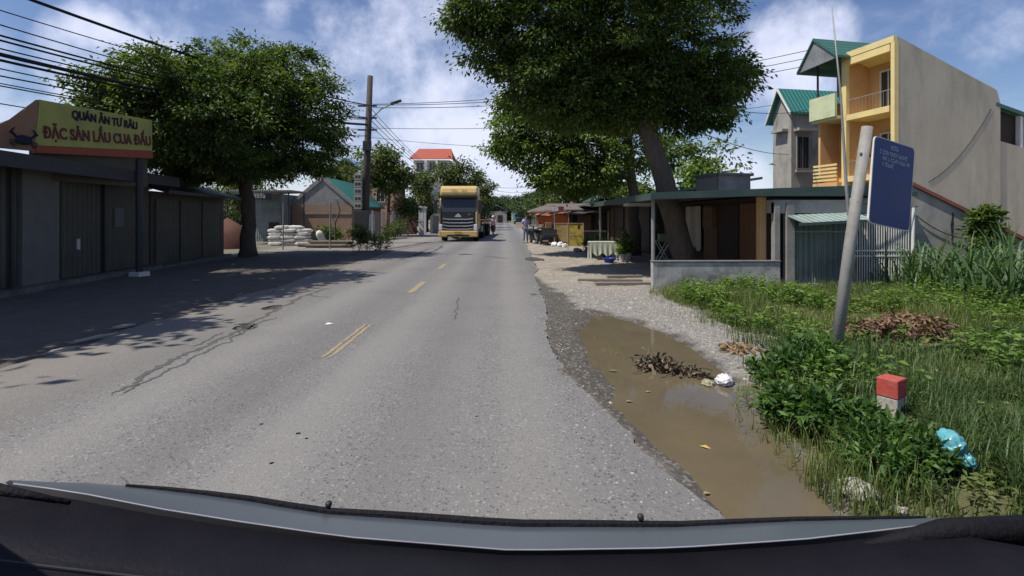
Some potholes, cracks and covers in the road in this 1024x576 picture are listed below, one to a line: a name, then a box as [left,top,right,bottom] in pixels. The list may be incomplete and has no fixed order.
crack [112,288,328,394]
pothole [579,316,832,519]
